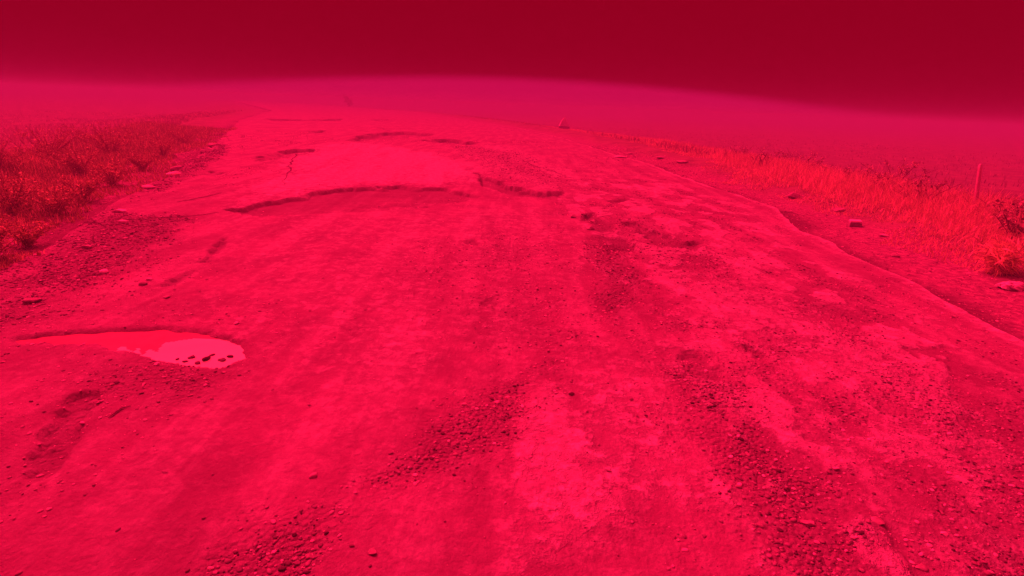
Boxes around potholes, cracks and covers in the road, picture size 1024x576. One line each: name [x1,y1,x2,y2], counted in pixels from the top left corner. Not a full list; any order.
pothole [576,212,639,260]
pothole [5,324,253,369]
pothole [620,218,719,253]
